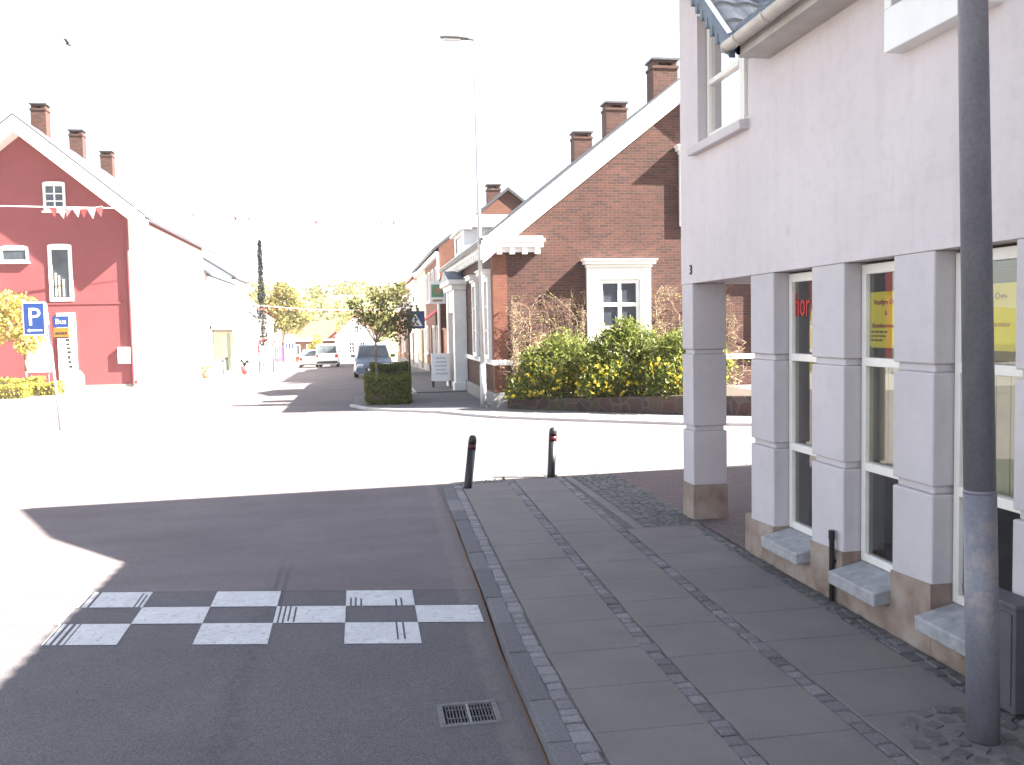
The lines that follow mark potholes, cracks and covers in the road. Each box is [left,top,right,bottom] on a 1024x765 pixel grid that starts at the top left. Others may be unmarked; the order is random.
drain grate [436,699,503,728]
